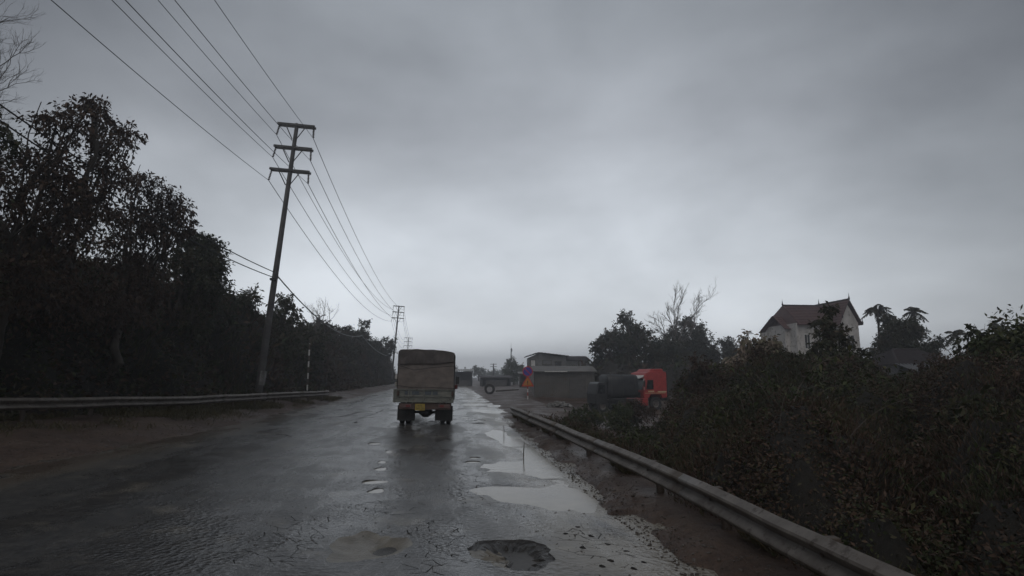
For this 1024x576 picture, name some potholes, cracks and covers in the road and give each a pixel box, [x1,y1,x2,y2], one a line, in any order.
pothole [326,531,413,563]
crack [231,516,336,568]
crack [364,496,469,575]
pothole [467,539,556,571]
